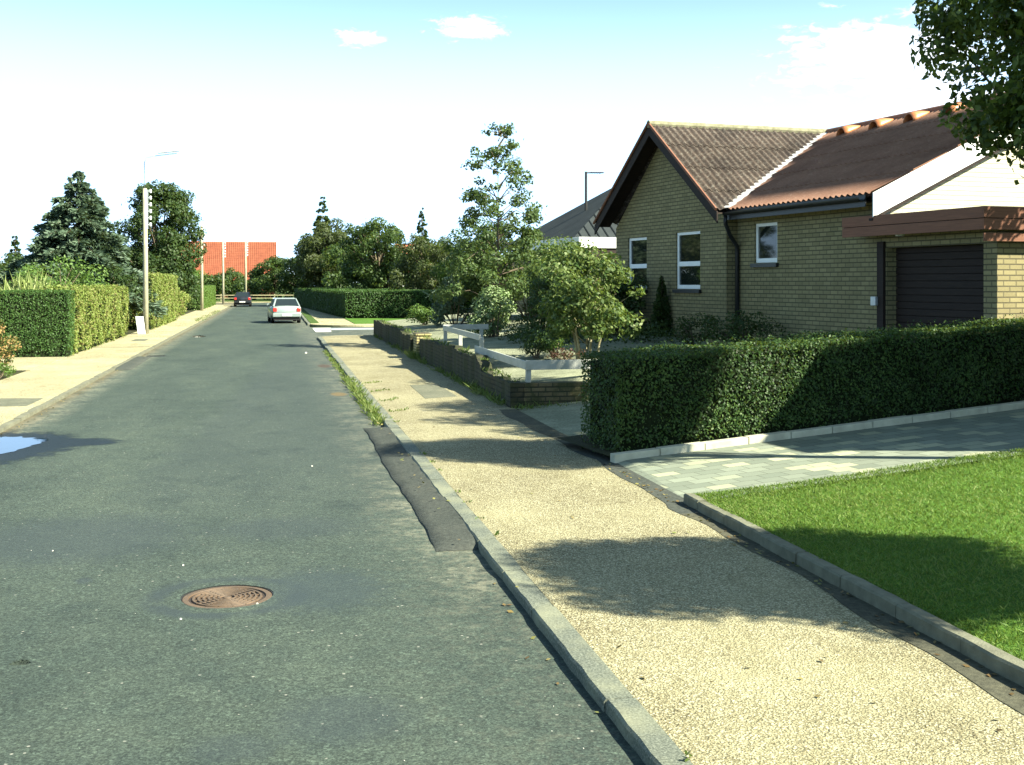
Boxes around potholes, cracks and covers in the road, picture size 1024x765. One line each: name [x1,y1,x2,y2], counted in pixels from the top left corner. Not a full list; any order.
manhole cover [180,585,274,608]
